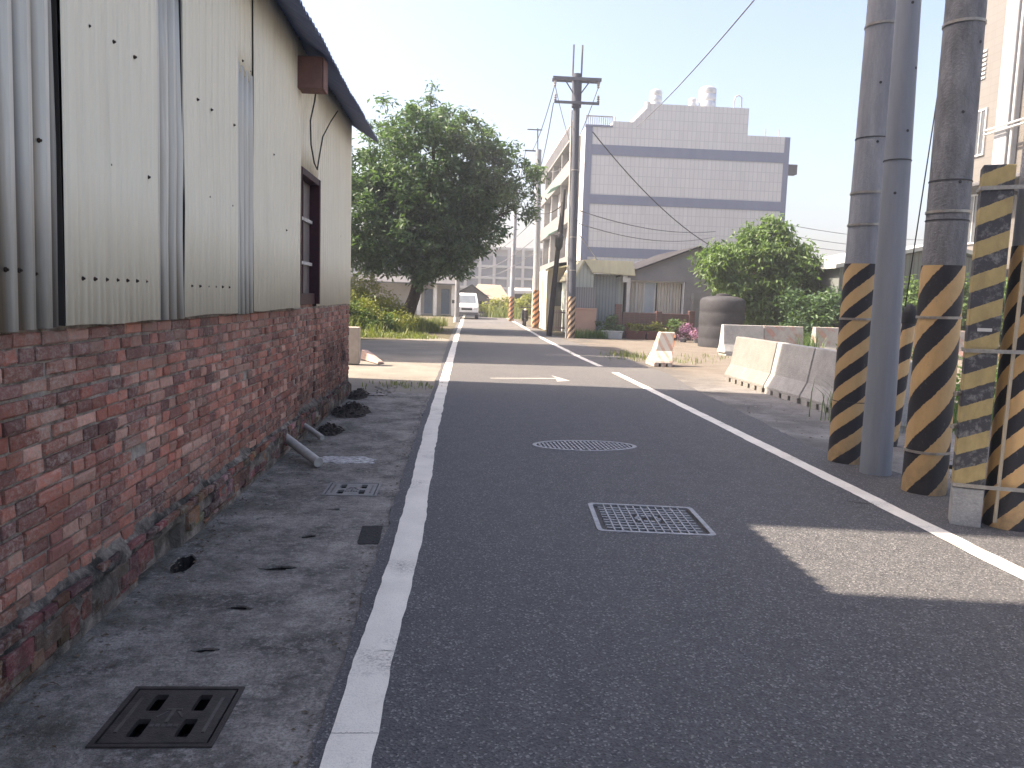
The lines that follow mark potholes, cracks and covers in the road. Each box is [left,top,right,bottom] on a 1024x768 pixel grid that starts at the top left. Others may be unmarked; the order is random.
manhole cover [532,440,637,451]
pothole [169,554,196,574]
